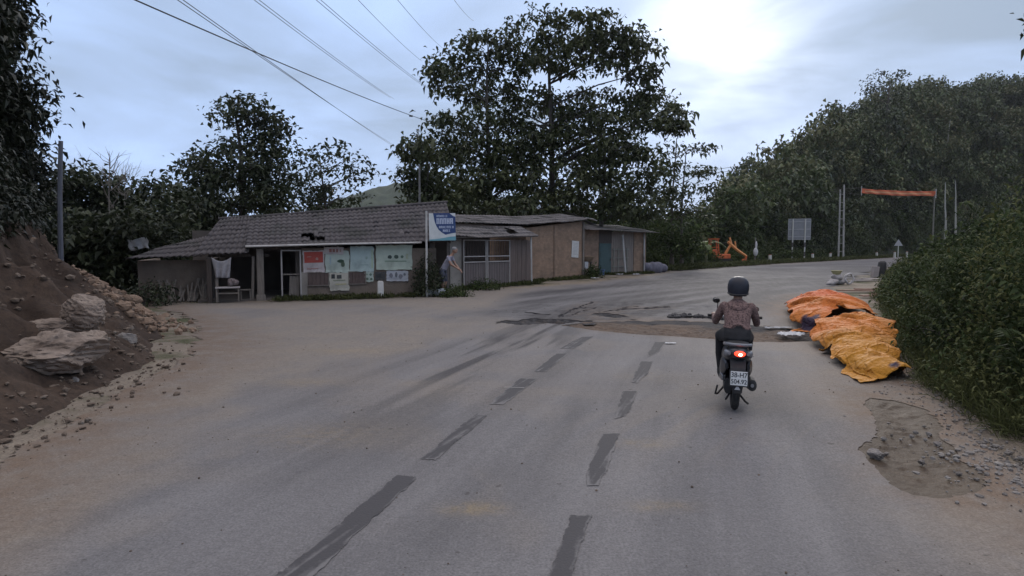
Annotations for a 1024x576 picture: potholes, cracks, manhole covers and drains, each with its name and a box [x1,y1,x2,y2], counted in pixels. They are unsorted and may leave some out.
crack [516,302,668,317]
pothole [858,398,986,498]
